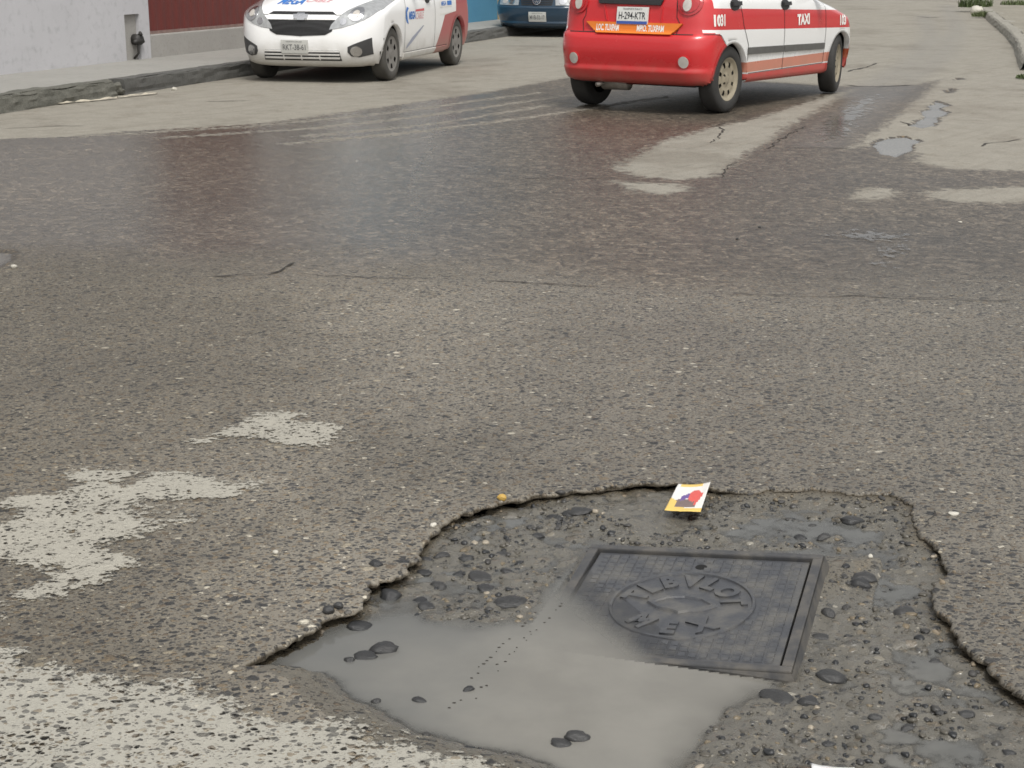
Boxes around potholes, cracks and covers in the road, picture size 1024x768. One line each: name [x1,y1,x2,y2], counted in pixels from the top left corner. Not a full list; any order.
crack [223,262,294,276]
pothole [868,136,925,157]
manhole cover [563,544,830,683]
pothole [909,101,953,128]
pothole [241,487,1024,768]
